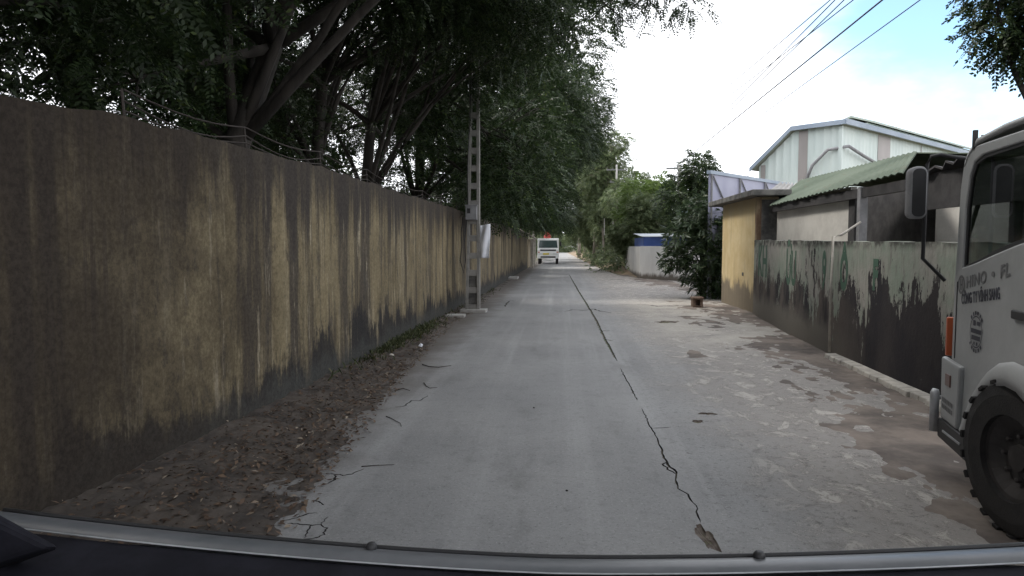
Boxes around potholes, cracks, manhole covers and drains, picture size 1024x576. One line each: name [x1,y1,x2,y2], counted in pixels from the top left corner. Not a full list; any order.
crack [287,469,363,539]
pothole [694,524,722,552]
